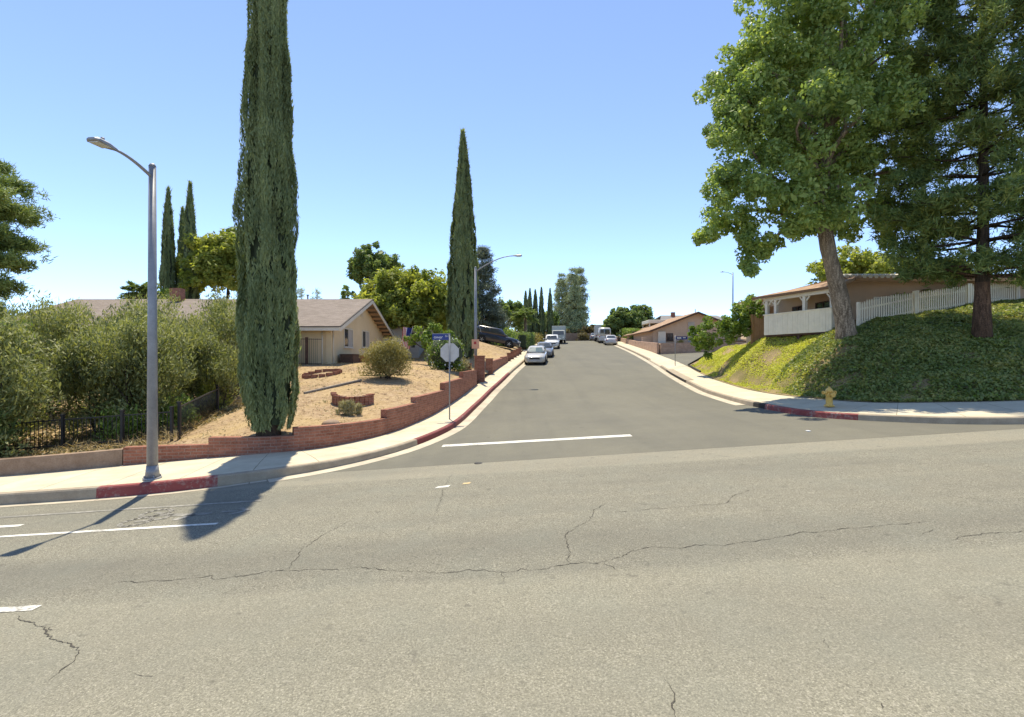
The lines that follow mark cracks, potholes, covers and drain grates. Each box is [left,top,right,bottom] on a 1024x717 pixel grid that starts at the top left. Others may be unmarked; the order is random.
crack [18,616,79,681]
crack [118,504,925,582]
